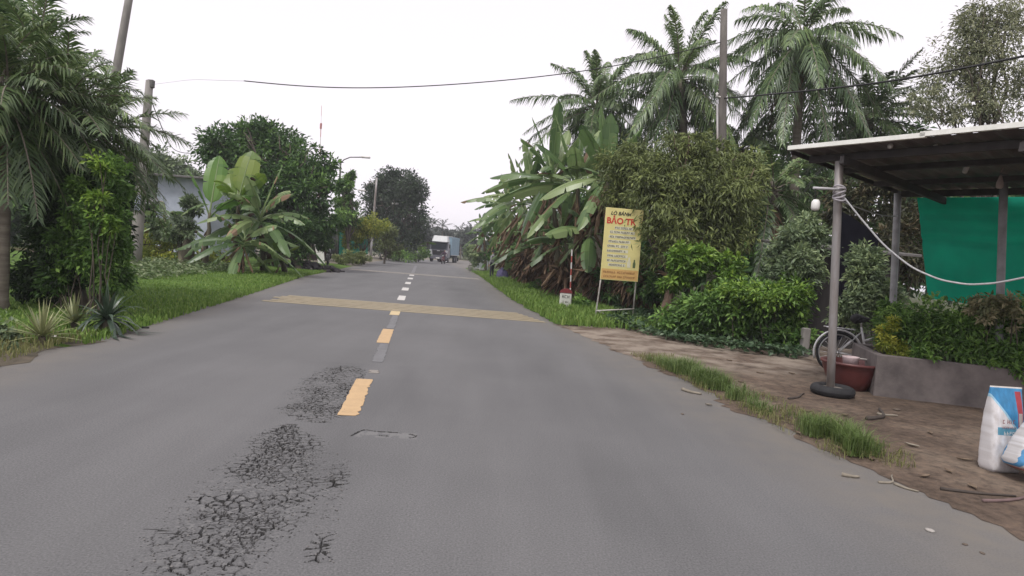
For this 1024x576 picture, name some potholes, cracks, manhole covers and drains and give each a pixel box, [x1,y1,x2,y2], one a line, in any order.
crack [126,366,366,576]
